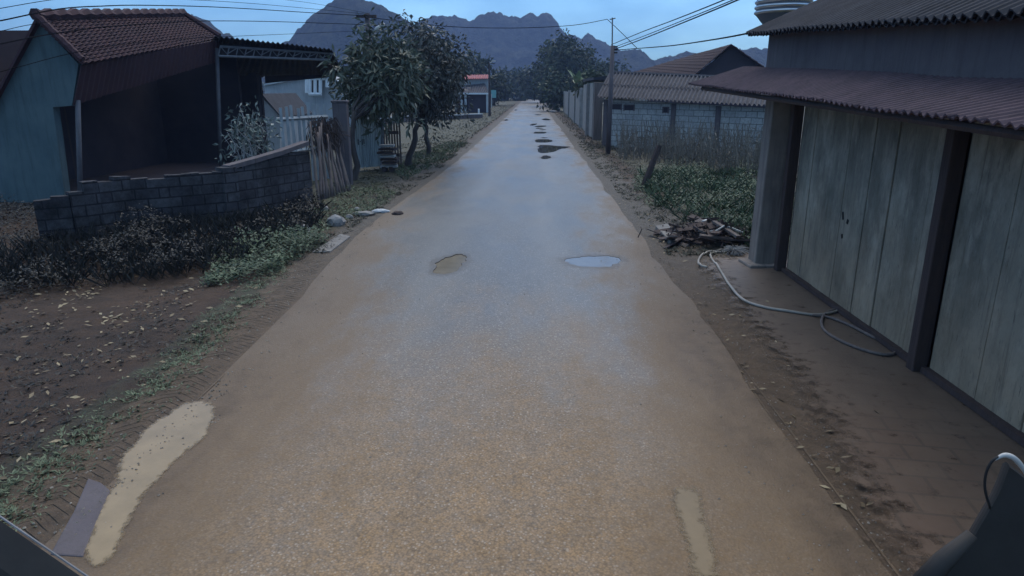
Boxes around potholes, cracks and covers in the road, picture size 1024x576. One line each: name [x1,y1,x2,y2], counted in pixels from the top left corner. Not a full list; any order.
pothole [564,256,621,267]
pothole [433,254,467,274]
pothole [537,145,569,153]
